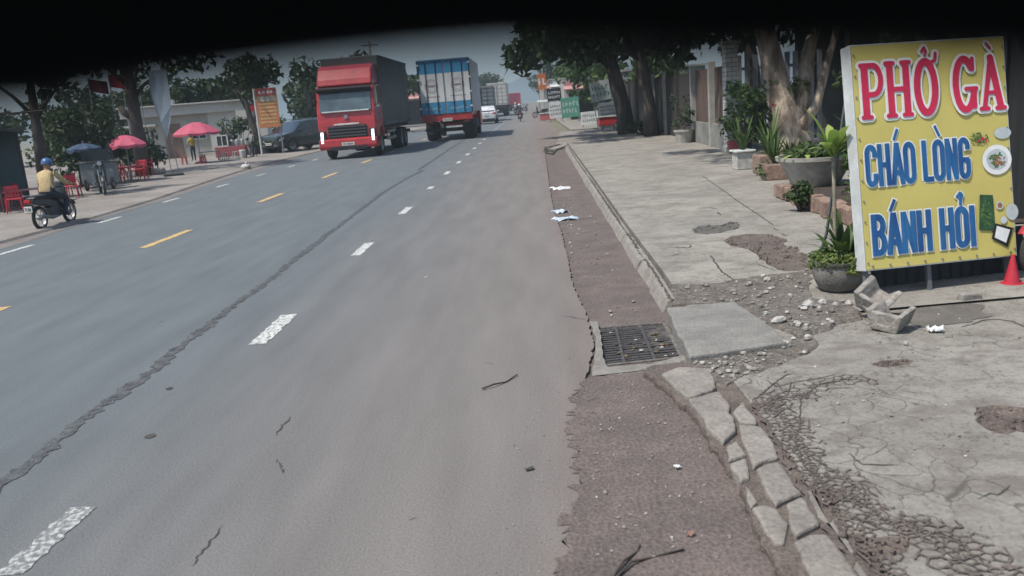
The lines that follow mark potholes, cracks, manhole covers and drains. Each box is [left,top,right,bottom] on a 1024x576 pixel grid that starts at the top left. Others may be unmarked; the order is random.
crack [193,525,223,565]
drain grate [594,322,684,367]
pothole [724,234,809,271]
pothole [871,359,913,367]
pothole [974,405,1024,435]
pothole [692,221,741,234]
crack [750,372,1024,576]
